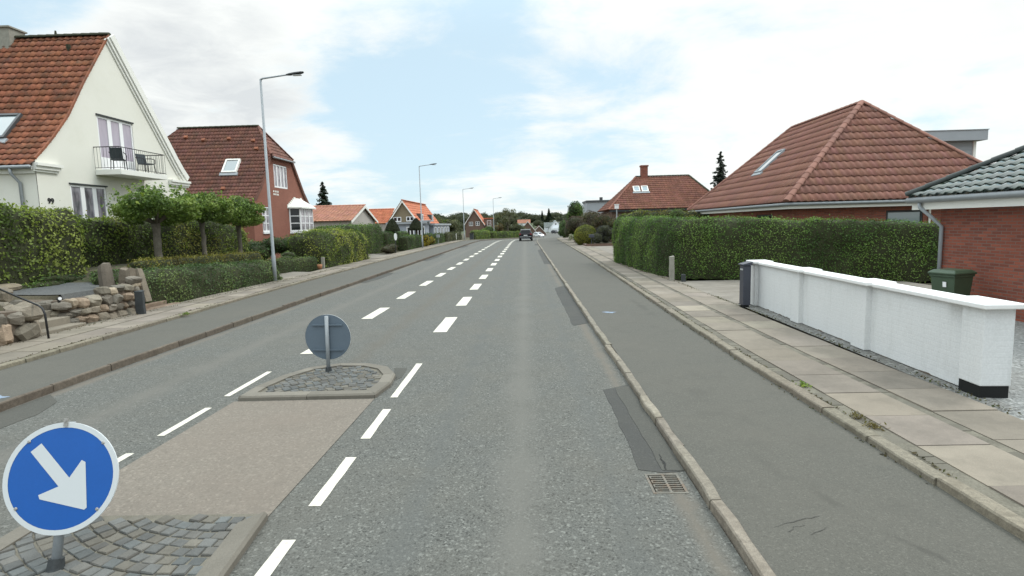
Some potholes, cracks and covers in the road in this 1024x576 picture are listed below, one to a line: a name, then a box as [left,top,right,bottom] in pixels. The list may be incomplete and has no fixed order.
drain grate [644,473,689,494]
